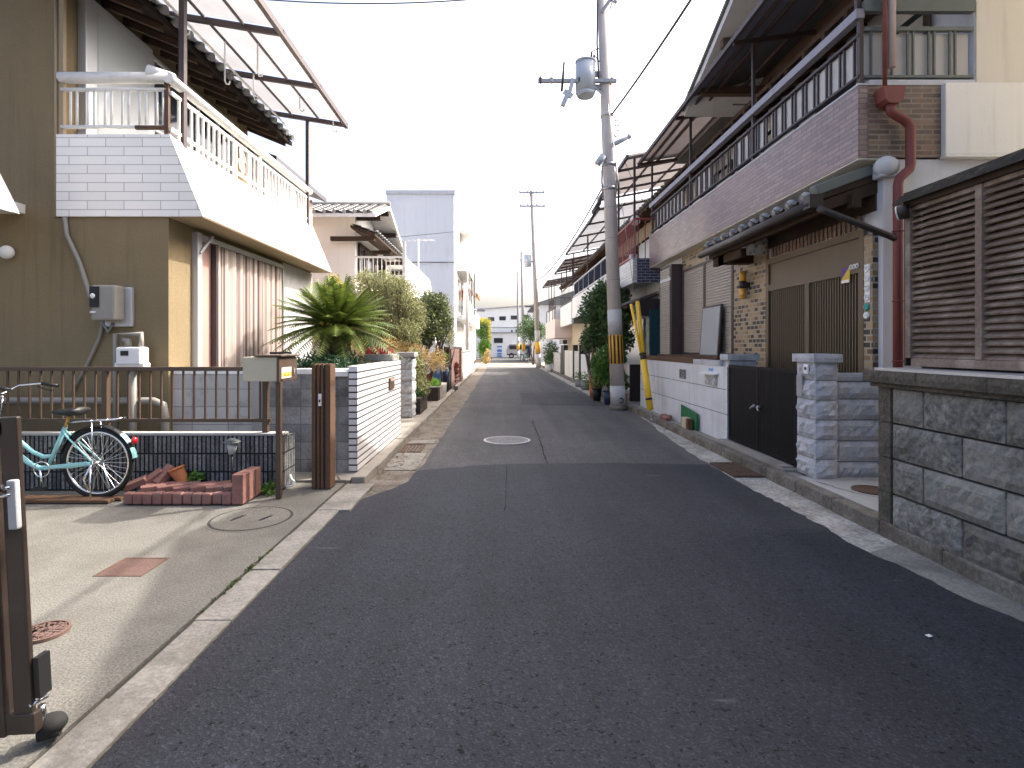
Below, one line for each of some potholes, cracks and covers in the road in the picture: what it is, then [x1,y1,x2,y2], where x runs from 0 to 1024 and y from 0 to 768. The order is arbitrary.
manhole cover [204,506,296,533]
manhole cover [32,619,72,645]
manhole cover [851,485,878,495]
drain grate [398,444,426,453]
manhole cover [483,436,530,445]
drain grate [710,462,763,478]
